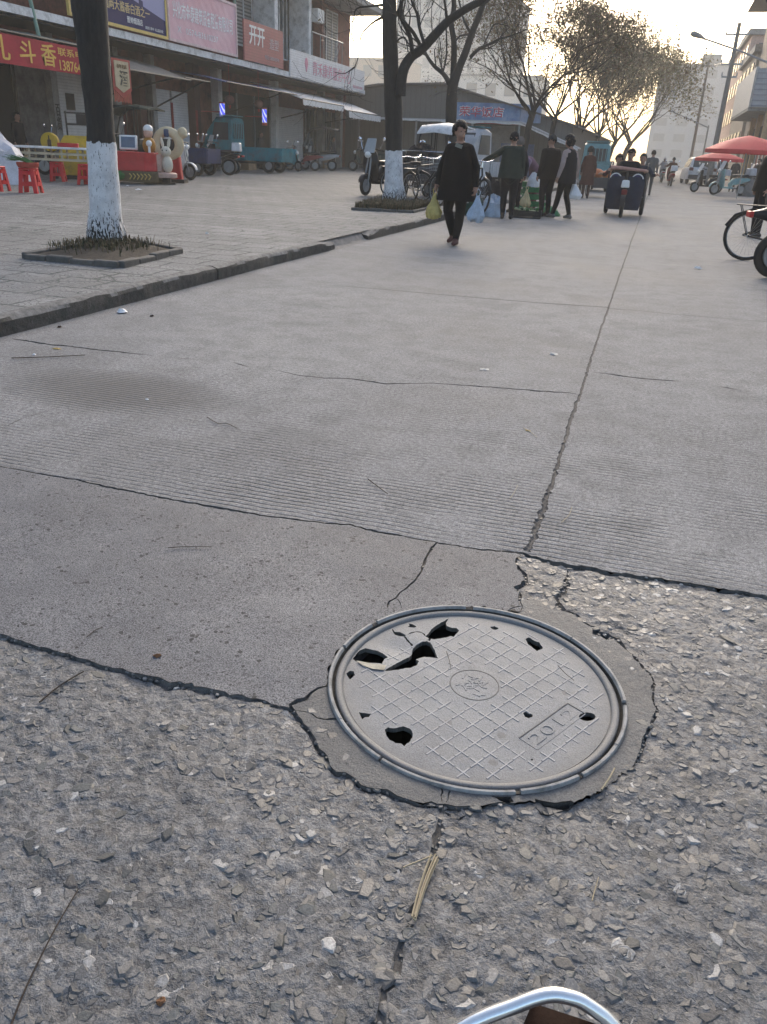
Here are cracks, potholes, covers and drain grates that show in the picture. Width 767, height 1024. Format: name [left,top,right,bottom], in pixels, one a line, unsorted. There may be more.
manhole cover [327,605,628,818]
crack [0,466,767,767]
